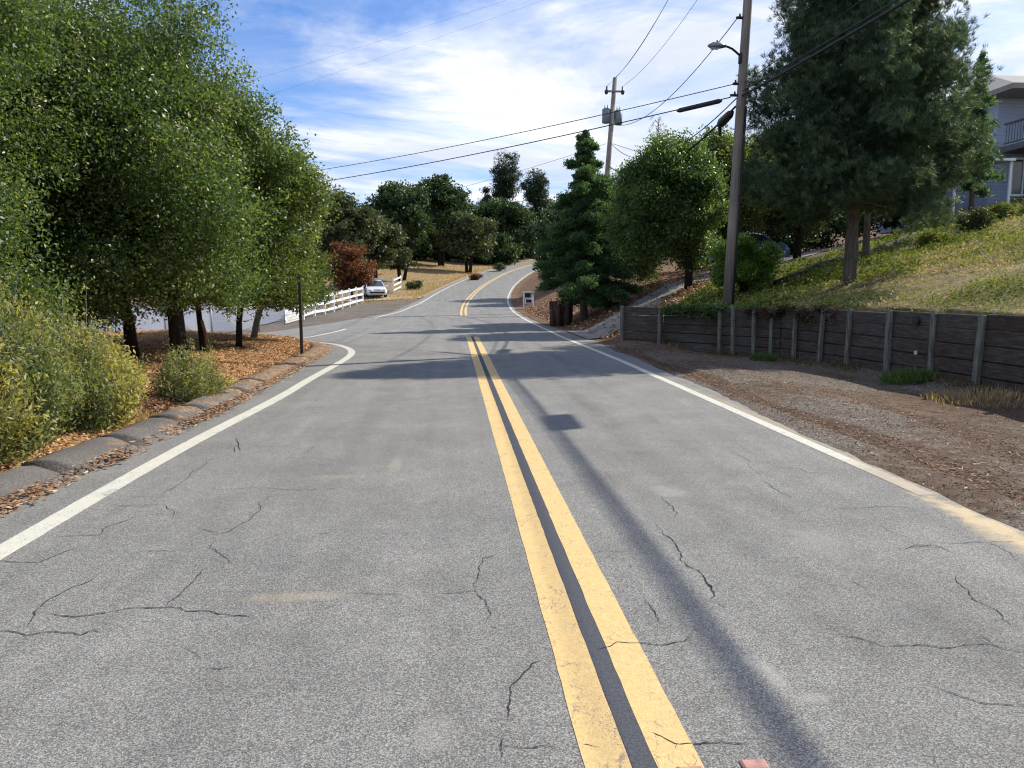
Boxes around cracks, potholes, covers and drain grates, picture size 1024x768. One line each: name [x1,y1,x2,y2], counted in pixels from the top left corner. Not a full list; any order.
crack [357,555,496,628]
crack [10,570,252,641]
crack [1,420,316,562]
crack [501,659,597,757]
crack [851,573,1022,652]
crack [657,499,725,607]
crack [653,732,747,746]
